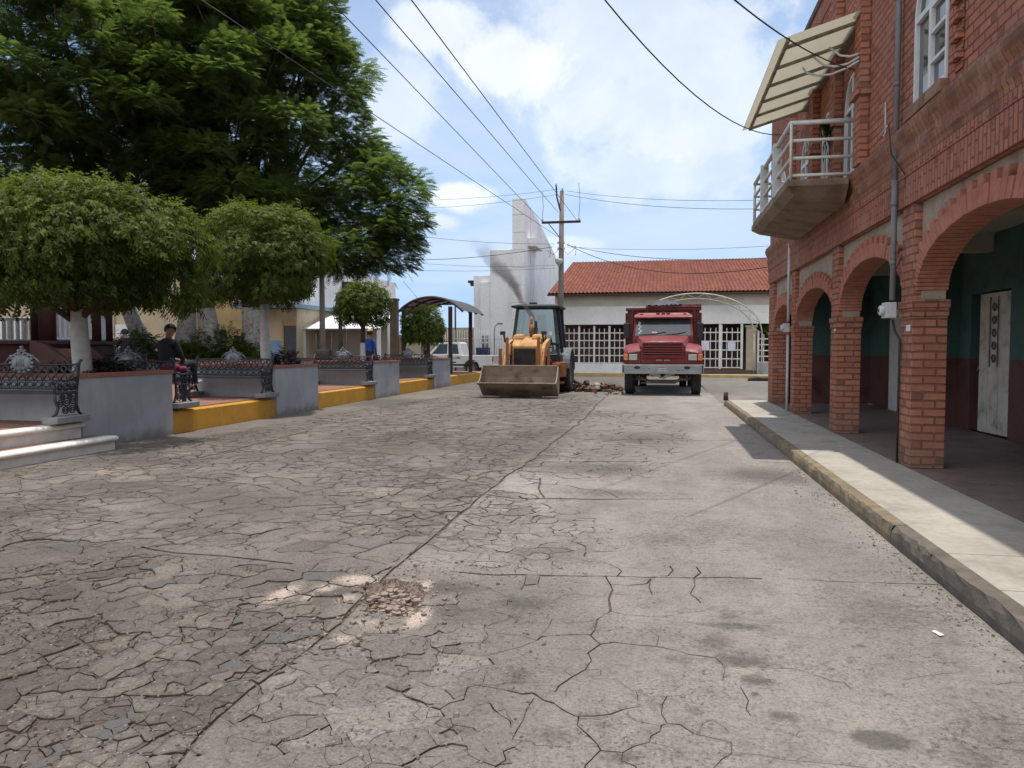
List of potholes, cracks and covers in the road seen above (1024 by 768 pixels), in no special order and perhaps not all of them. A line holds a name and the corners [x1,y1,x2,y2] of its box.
crack [0,394,692,572]
crack [0,553,864,768]
